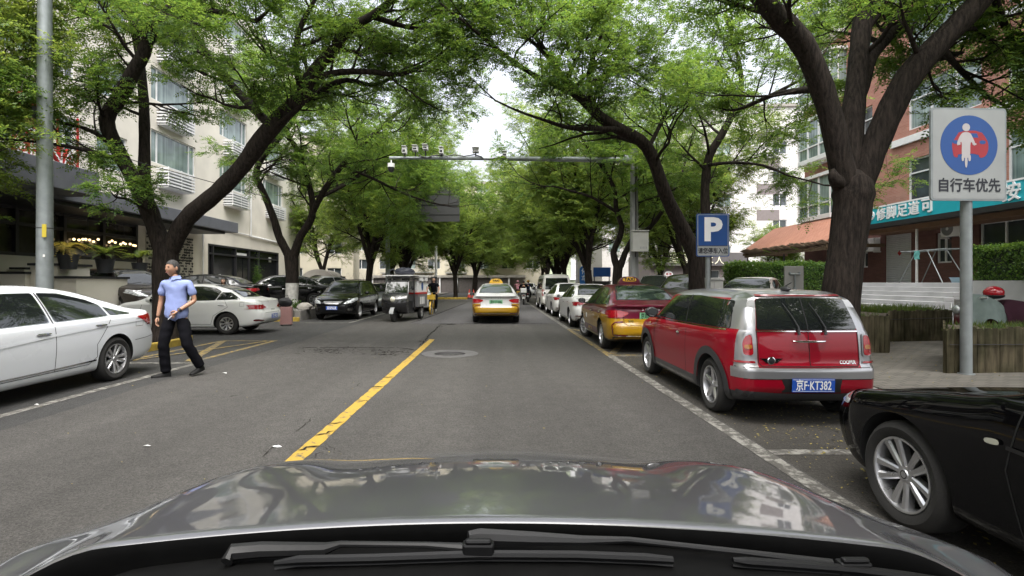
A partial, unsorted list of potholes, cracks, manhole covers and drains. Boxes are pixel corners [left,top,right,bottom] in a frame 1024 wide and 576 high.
crack [298,418,346,456]
manhole cover [421,350,478,358]
